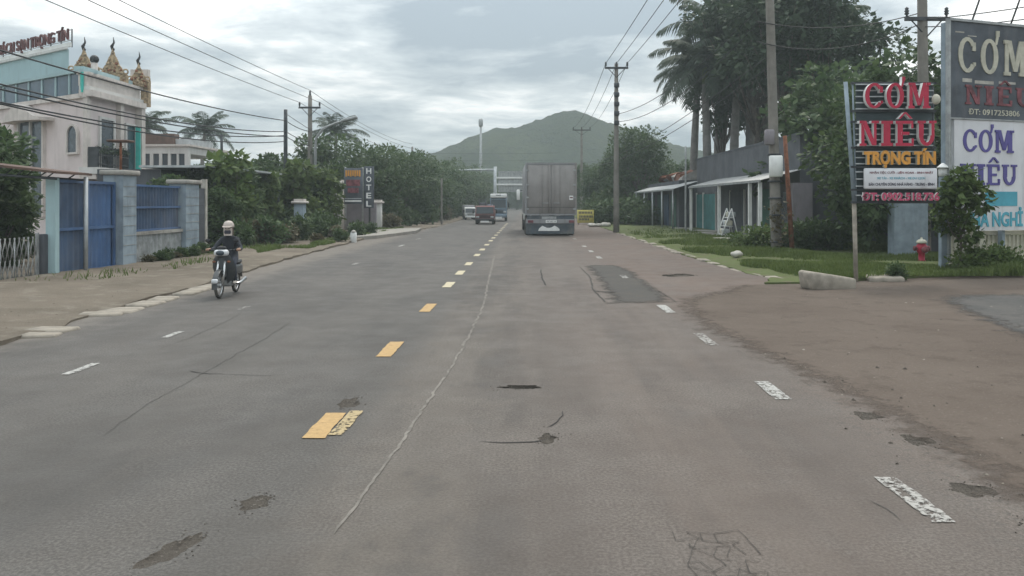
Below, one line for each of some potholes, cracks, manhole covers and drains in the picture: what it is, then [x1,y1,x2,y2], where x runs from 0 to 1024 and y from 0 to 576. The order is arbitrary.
pothole [221,492,275,518]
crack [106,324,288,434]
pothole [335,396,366,410]
pothole [534,426,562,446]
crack [672,529,768,576]
pothole [941,479,1009,500]
crack [334,256,563,533]
pothole [115,523,219,576]
pothole [853,408,895,422]
pothole [892,431,942,448]
